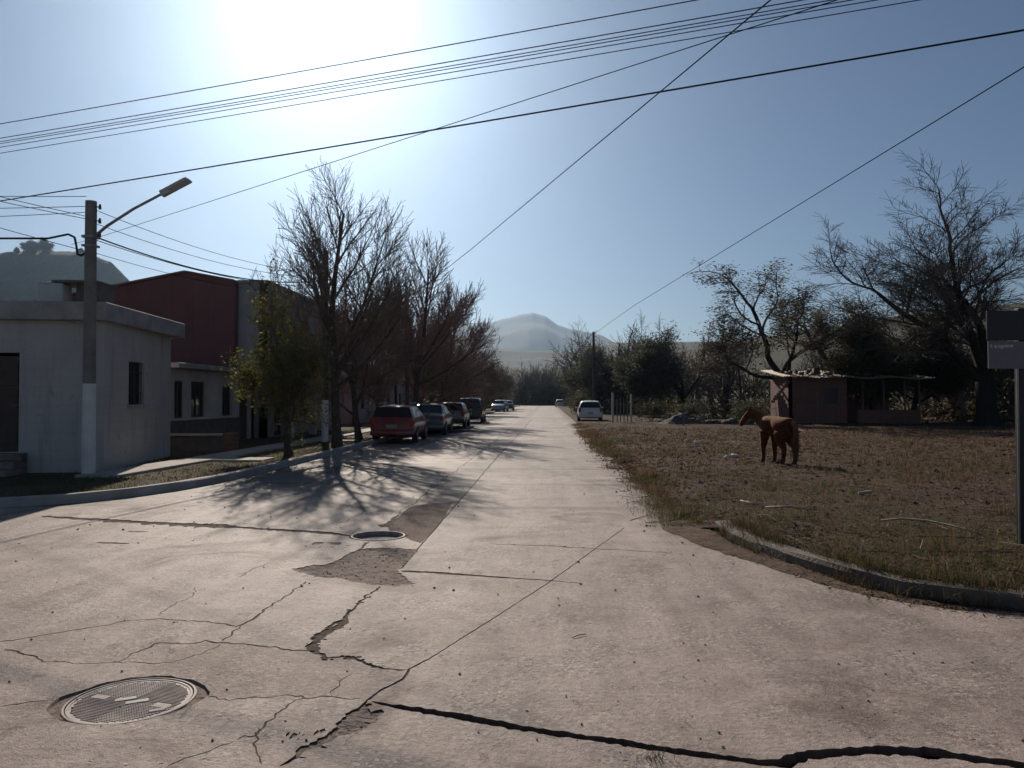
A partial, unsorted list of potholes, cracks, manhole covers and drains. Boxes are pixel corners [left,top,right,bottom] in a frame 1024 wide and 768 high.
manhole cover [46,675,210,725]
manhole cover [349,531,408,541]
crack [1,582,407,767]
